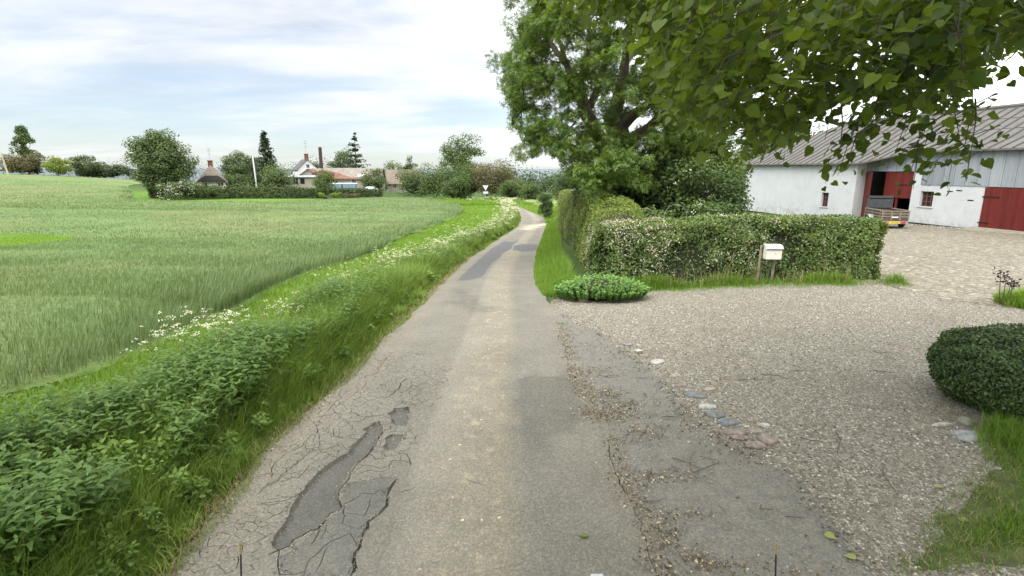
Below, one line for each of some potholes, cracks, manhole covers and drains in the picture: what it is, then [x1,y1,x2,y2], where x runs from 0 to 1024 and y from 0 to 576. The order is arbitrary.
crack [182,351,450,576]
pothole [388,406,410,426]
pothole [272,422,383,551]
pothole [383,434,406,450]
